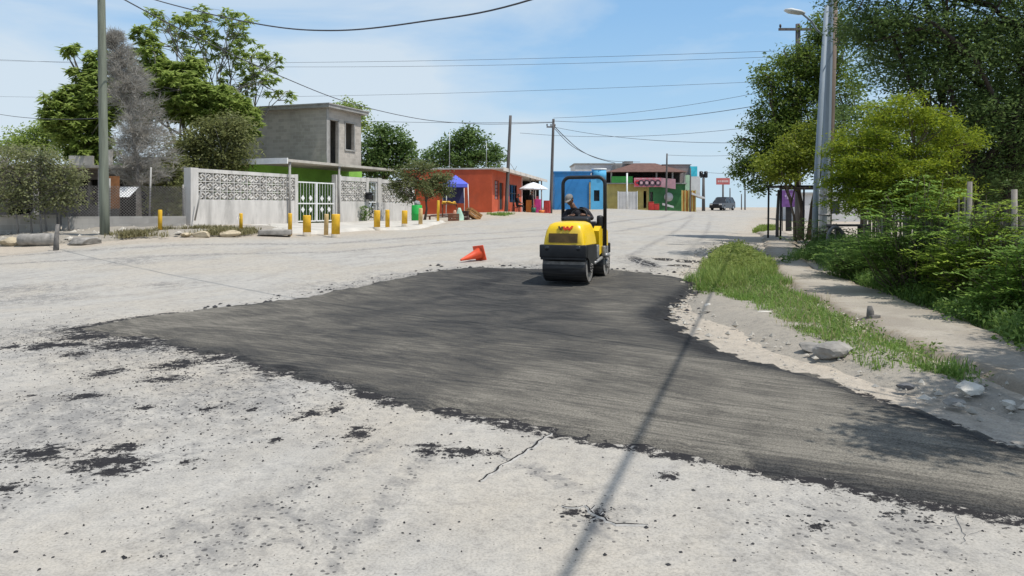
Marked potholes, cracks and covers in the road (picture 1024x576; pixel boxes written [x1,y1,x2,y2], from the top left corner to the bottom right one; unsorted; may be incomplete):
crack [935,515,981,543]
crack [479,433,553,482]
